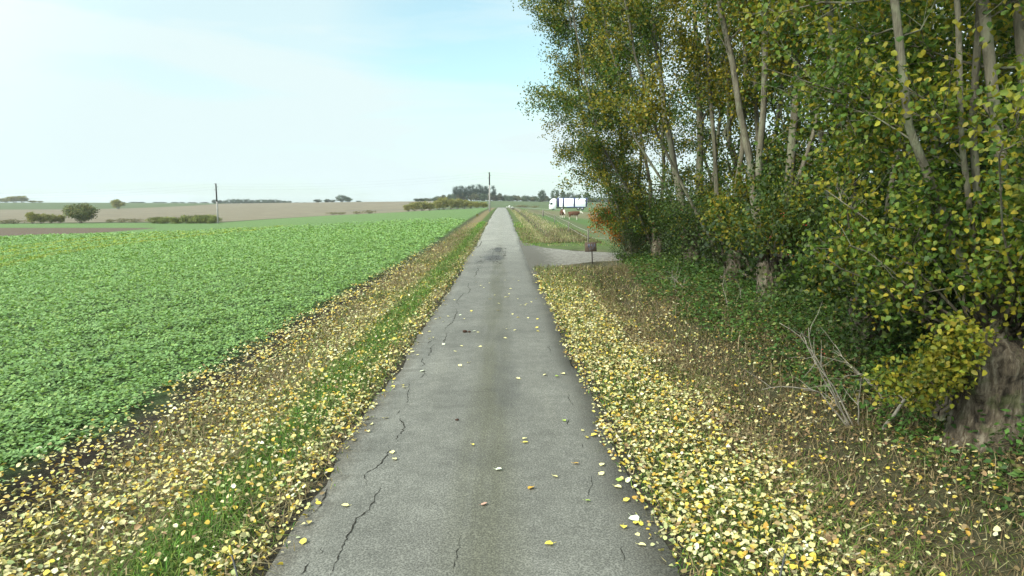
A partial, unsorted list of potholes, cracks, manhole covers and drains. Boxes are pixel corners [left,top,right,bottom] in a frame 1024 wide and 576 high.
crack [301,242,506,576]
